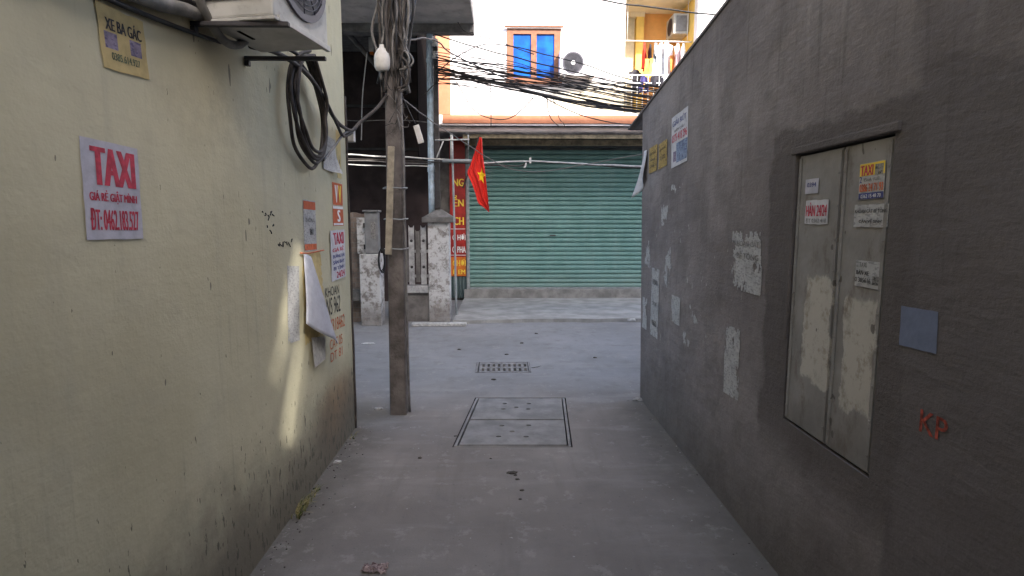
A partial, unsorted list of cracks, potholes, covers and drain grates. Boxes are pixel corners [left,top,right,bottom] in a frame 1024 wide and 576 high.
drain grate [474,362,531,401]
manhole cover [452,398,573,447]
